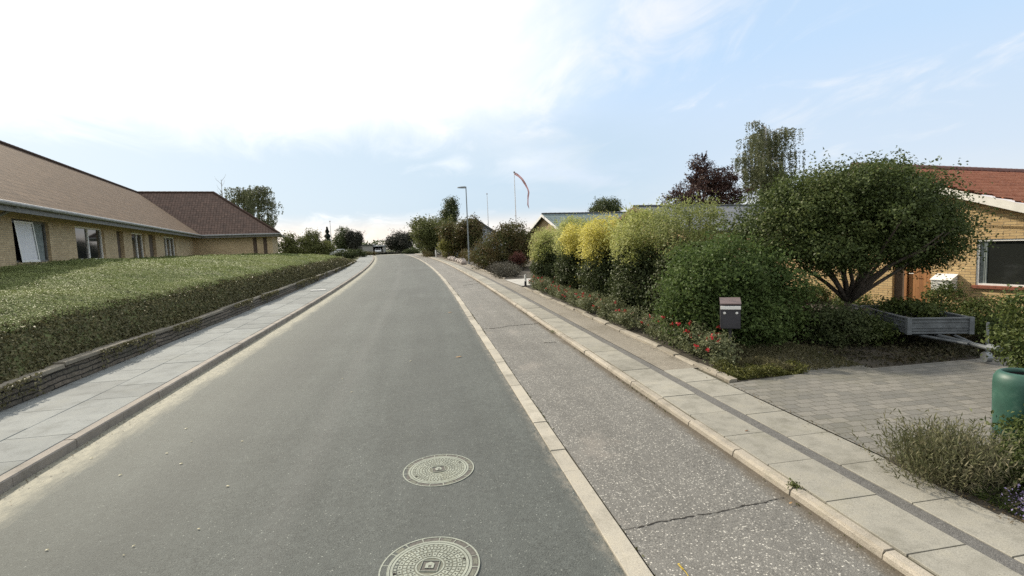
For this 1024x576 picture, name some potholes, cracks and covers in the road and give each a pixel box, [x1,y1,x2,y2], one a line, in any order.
manhole cover [403,454,474,487]
crack [624,497,784,530]
manhole cover [378,536,480,576]
